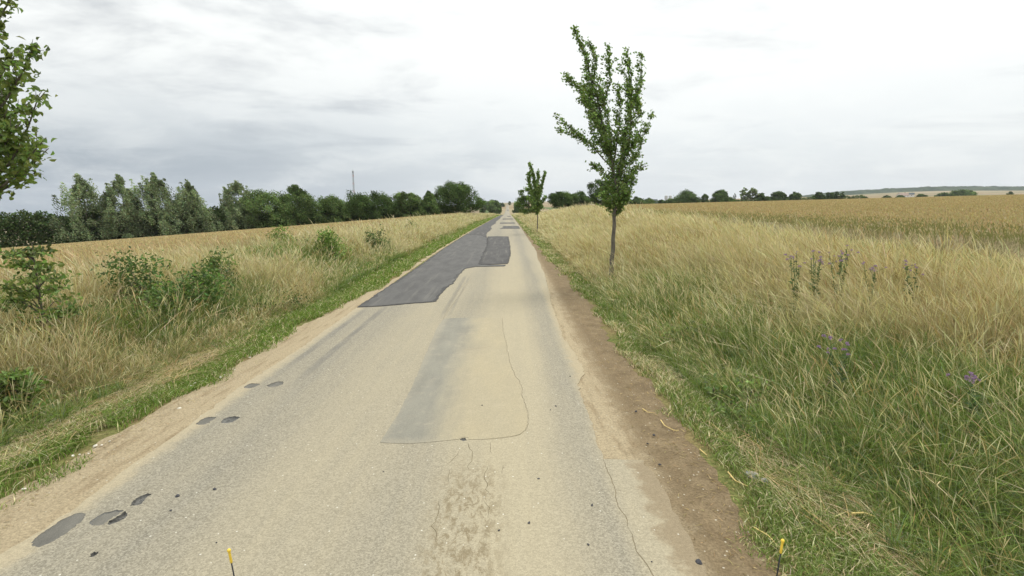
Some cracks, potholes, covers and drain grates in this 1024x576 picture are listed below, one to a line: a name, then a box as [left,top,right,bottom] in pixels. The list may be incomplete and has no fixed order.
crack [604,462,654,576]
crack [431,320,529,540]
